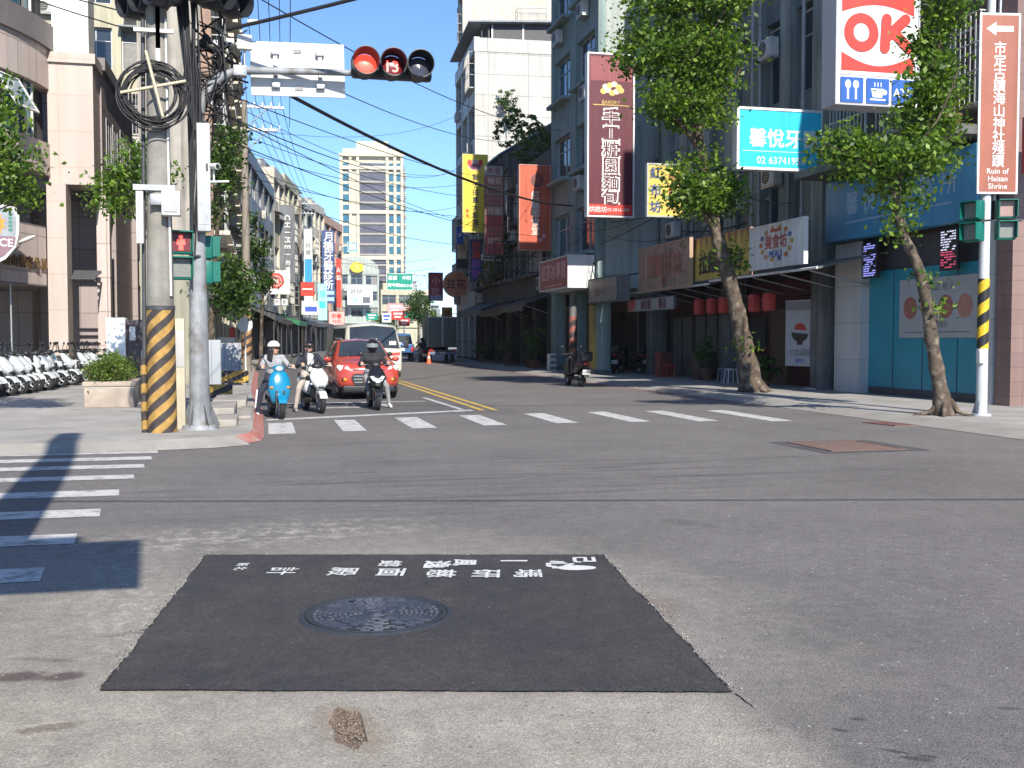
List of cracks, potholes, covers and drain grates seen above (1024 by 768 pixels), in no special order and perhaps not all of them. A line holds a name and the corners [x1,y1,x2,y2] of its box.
pothole [328,707,368,751]
manhole cover [786,440,907,452]
manhole cover [298,595,453,636]
